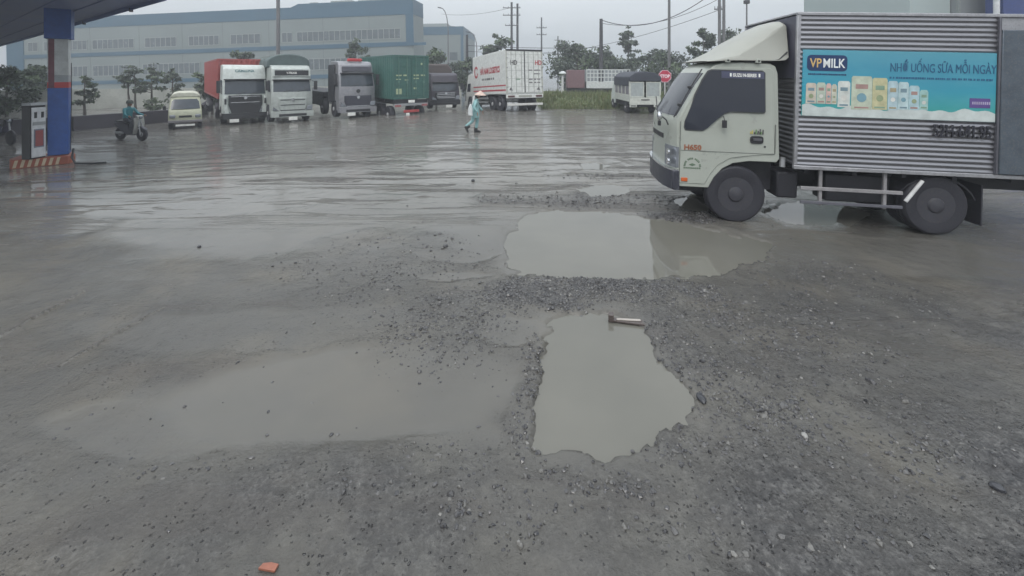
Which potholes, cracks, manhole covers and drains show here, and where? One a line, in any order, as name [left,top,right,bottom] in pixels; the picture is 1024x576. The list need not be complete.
pothole [494,207,789,282]
pothole [519,306,719,470]
